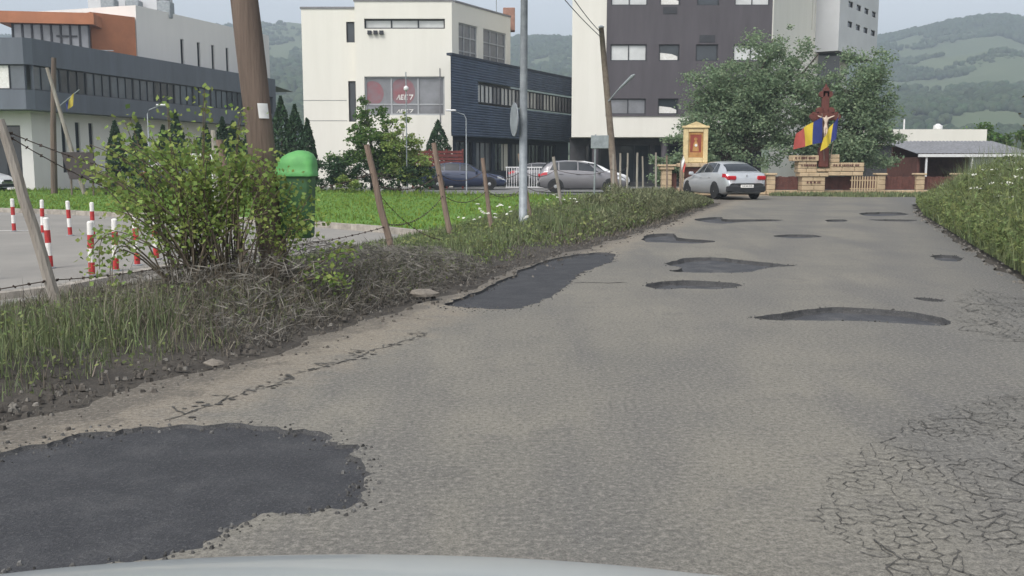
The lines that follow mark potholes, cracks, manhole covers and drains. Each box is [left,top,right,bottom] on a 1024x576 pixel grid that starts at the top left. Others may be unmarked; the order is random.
pothole [642,279,745,290]
crack [165,332,427,420]
crack [951,290,1024,342]
crack [806,394,1024,576]
pothole [664,256,795,274]
pothole [641,233,715,244]
pothole [748,306,951,326]
